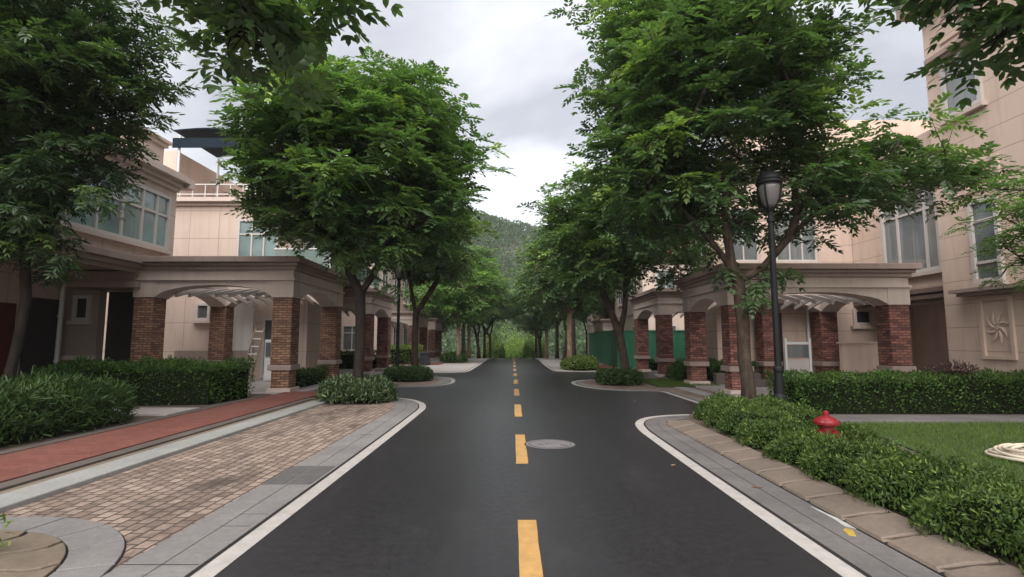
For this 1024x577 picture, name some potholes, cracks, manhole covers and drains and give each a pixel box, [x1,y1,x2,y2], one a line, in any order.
manhole cover [524,439,575,450]
